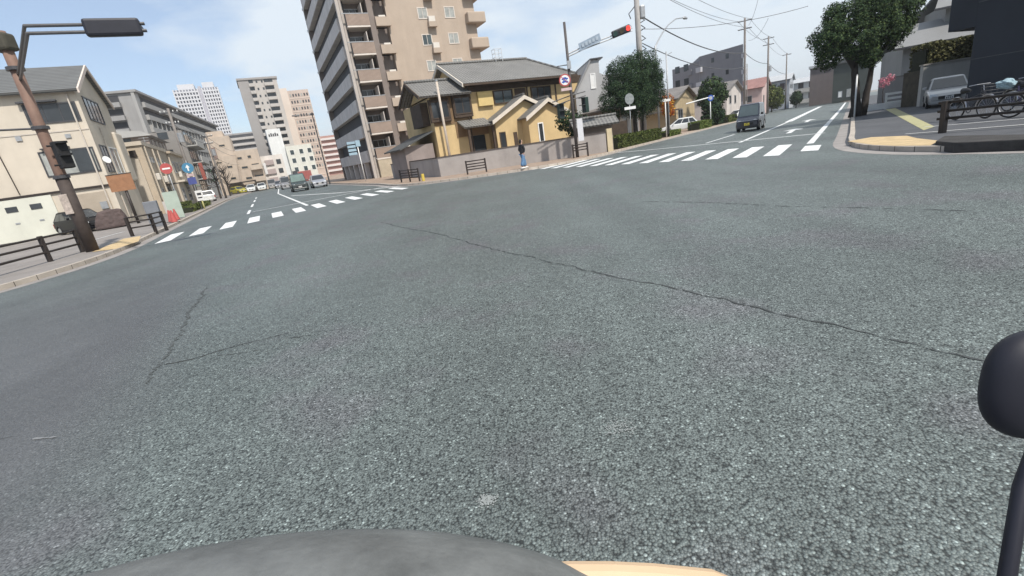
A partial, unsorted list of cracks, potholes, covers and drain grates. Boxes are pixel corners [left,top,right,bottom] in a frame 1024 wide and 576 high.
crack [381,222,984,361]
crack [166,329,336,364]
